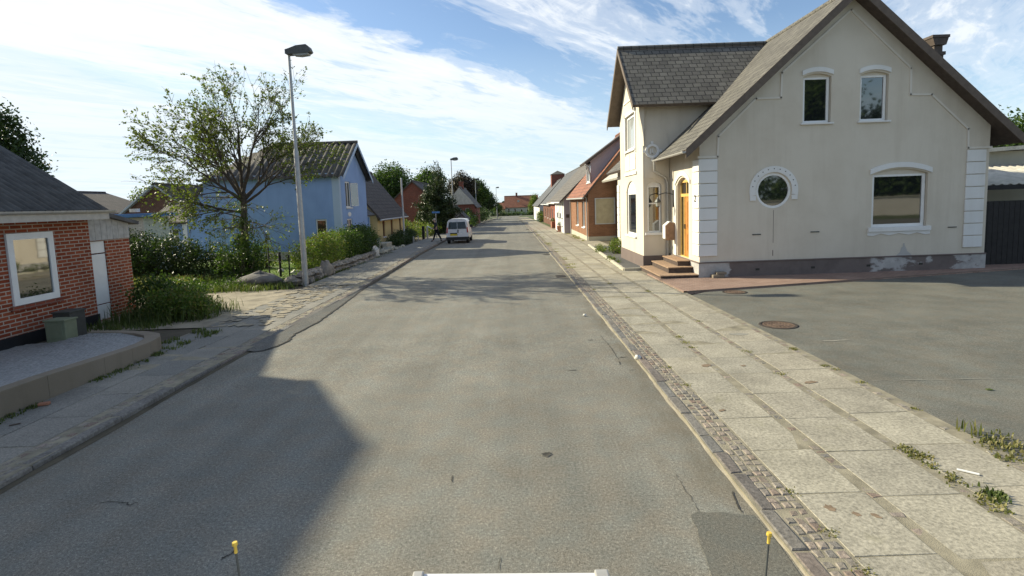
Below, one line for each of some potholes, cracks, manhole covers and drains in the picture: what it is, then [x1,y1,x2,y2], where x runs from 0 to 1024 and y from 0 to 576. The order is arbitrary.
manhole cover [758,321,799,329]
